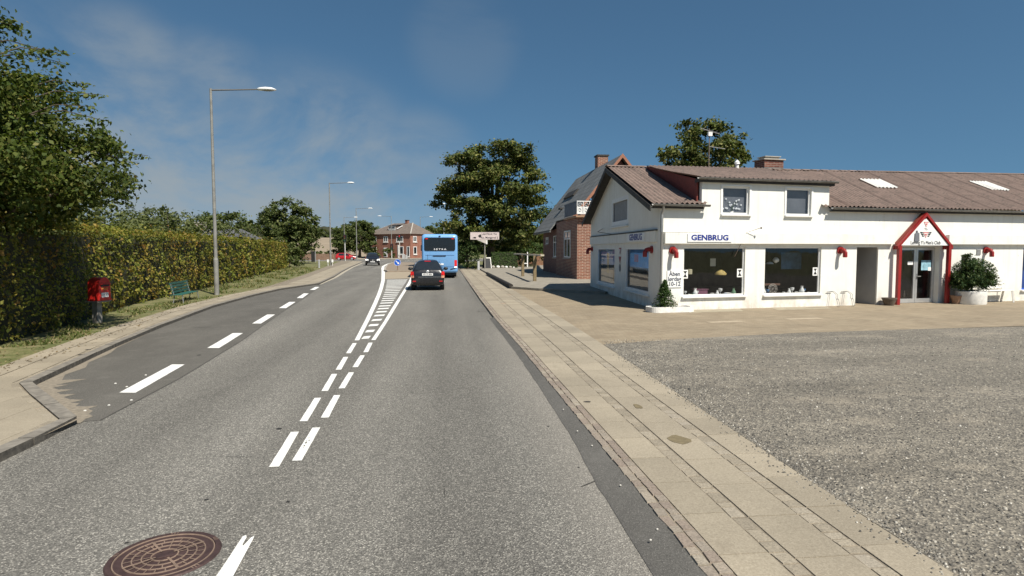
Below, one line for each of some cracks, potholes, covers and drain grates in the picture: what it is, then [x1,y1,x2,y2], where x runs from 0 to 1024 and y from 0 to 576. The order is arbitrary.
manhole cover [103,531,222,576]
